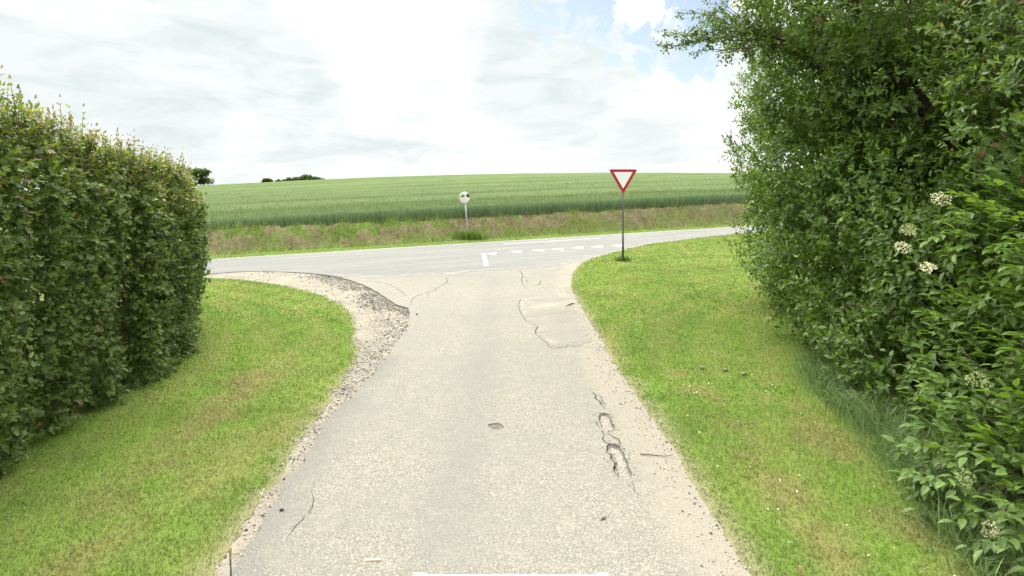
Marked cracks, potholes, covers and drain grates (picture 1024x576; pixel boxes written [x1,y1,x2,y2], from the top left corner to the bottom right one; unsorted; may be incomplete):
pothole [607,443,632,479]
pothole [598,413,615,432]
crack [589,389,638,498]
crack [518,268,583,349]
